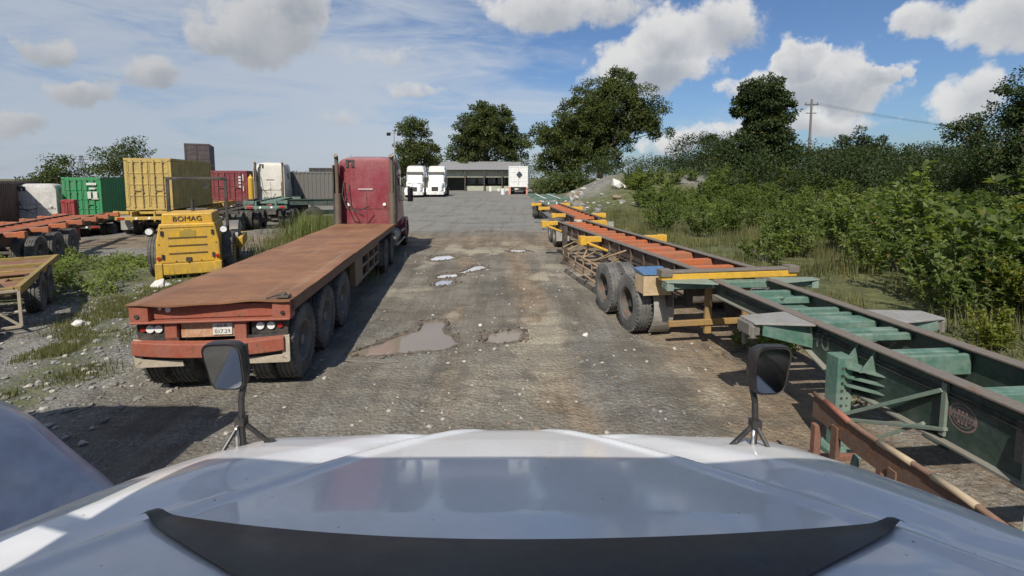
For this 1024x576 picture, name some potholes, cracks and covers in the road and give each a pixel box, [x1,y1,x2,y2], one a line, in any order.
pothole [426,254,461,262]
pothole [450,264,490,275]
pothole [342,318,462,359]
pothole [478,325,532,346]
pothole [428,278,462,287]
